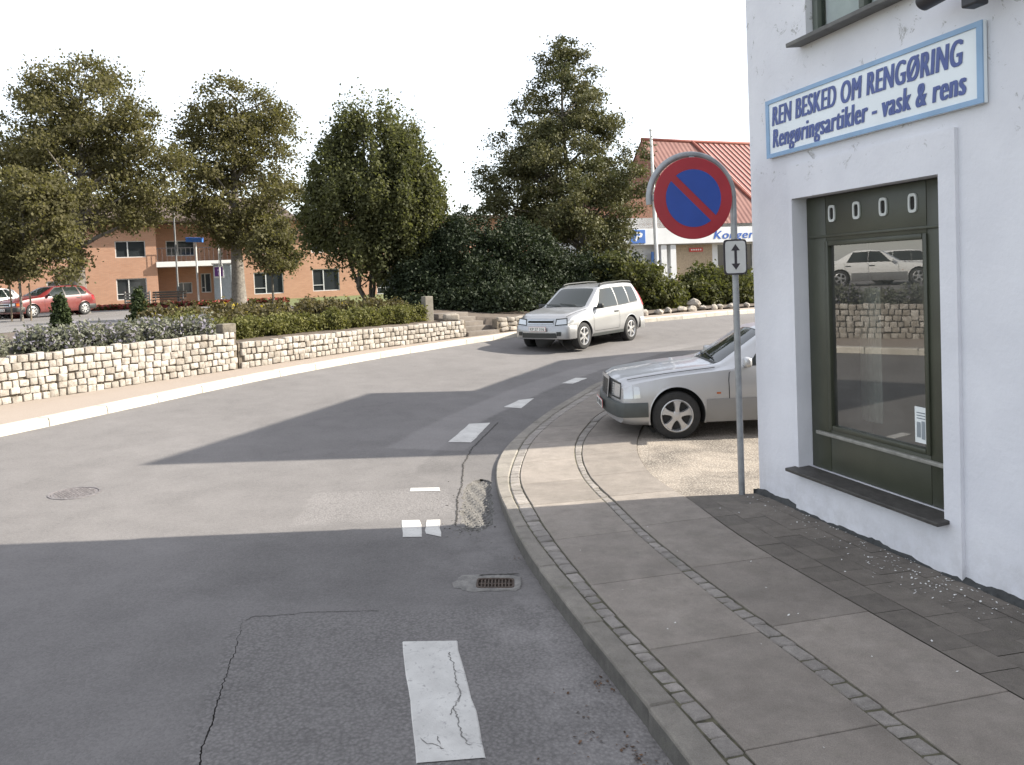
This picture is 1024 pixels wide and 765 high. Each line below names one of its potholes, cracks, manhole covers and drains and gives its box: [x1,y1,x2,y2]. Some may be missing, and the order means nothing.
drain grate [453,573,521,592]
crack [199,610,377,765]
crack [421,652,471,749]
manhole cover [47,486,102,500]
